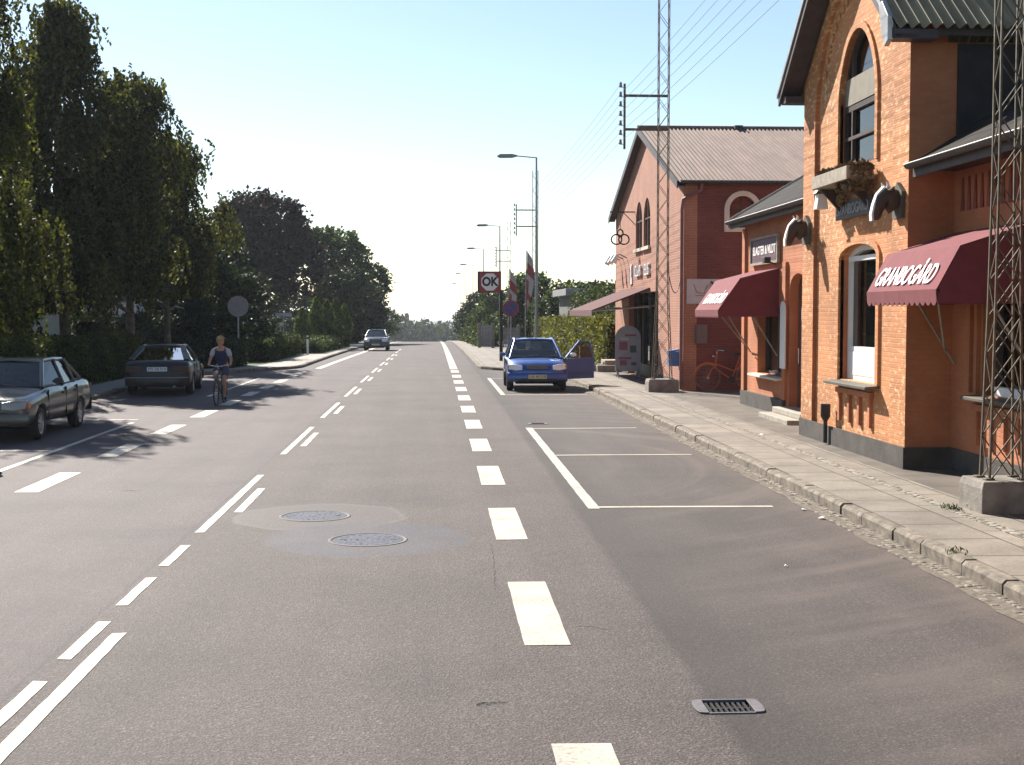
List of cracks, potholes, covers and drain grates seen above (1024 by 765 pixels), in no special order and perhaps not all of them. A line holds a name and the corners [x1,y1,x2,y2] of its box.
manhole cover [279,511,351,522]
drain grate [692,699,765,715]
manhole cover [328,533,408,547]
